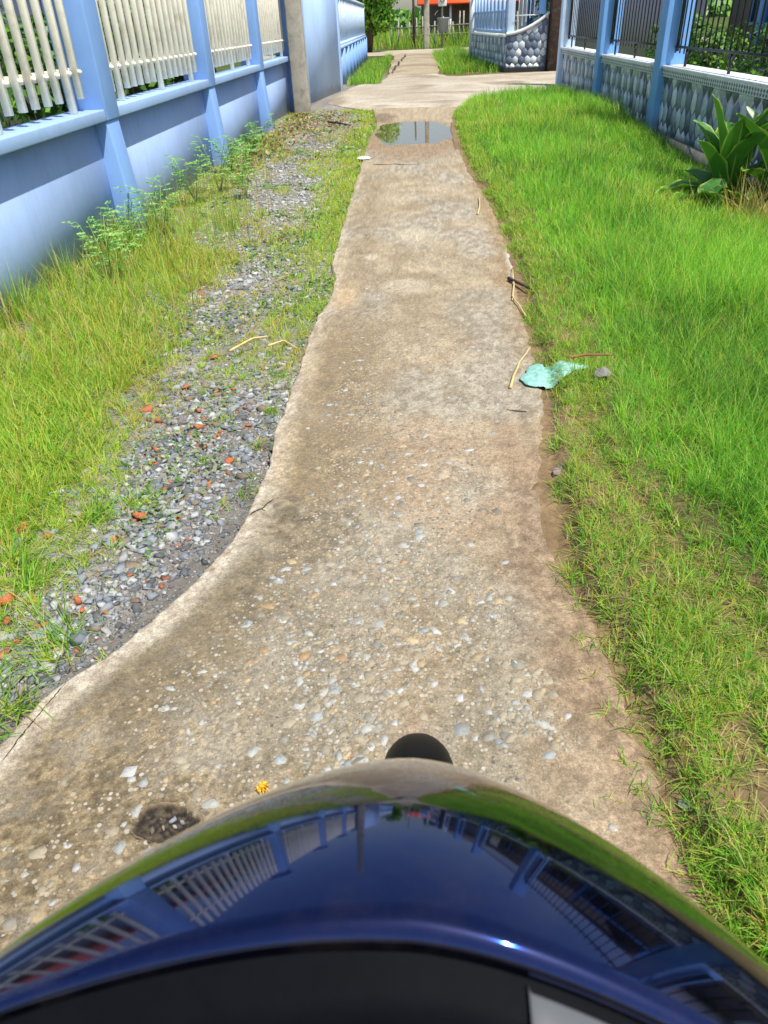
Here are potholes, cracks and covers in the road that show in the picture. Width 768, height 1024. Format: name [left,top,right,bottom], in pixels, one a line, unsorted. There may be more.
crack [3,681,67,760]
pothole [130,802,203,844]
